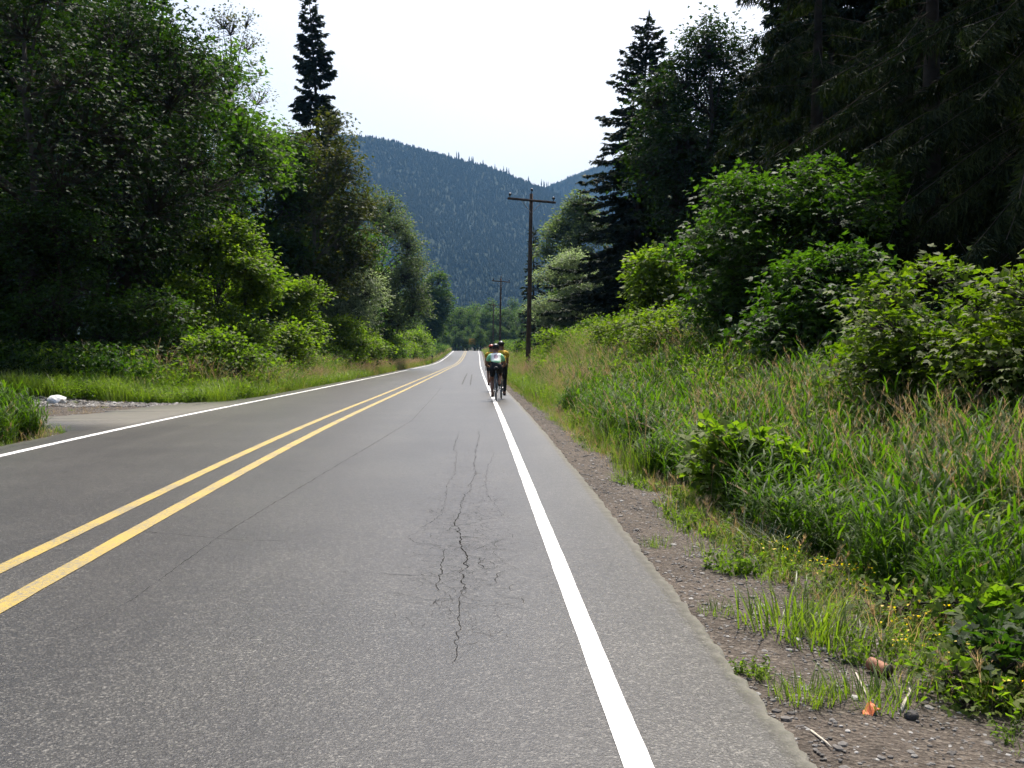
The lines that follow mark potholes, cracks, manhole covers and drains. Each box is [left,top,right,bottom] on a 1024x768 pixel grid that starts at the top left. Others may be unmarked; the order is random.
crack [388,432,541,663]
